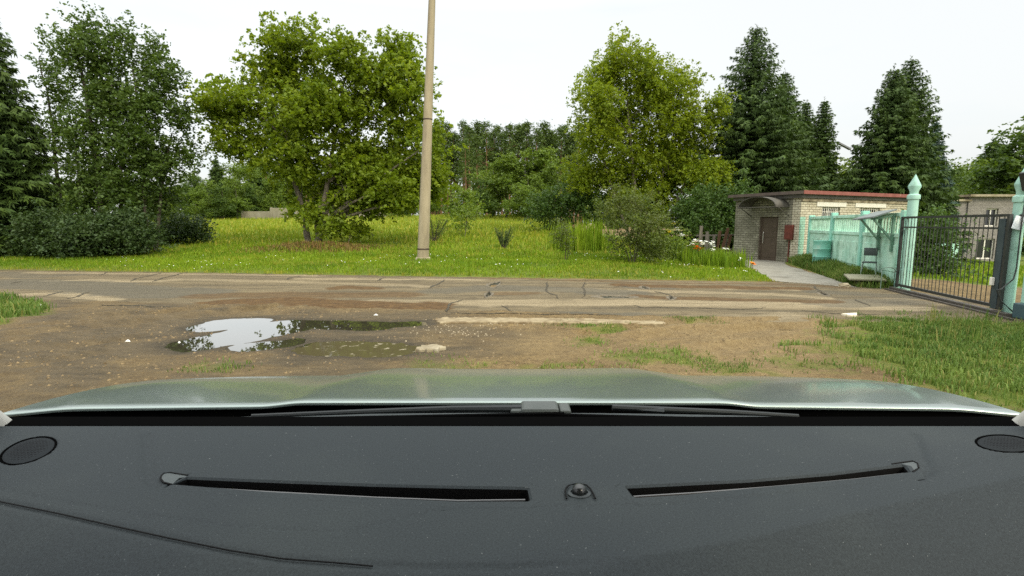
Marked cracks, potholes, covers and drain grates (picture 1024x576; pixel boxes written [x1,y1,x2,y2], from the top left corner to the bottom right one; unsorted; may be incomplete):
crack [635,291,757,309]
